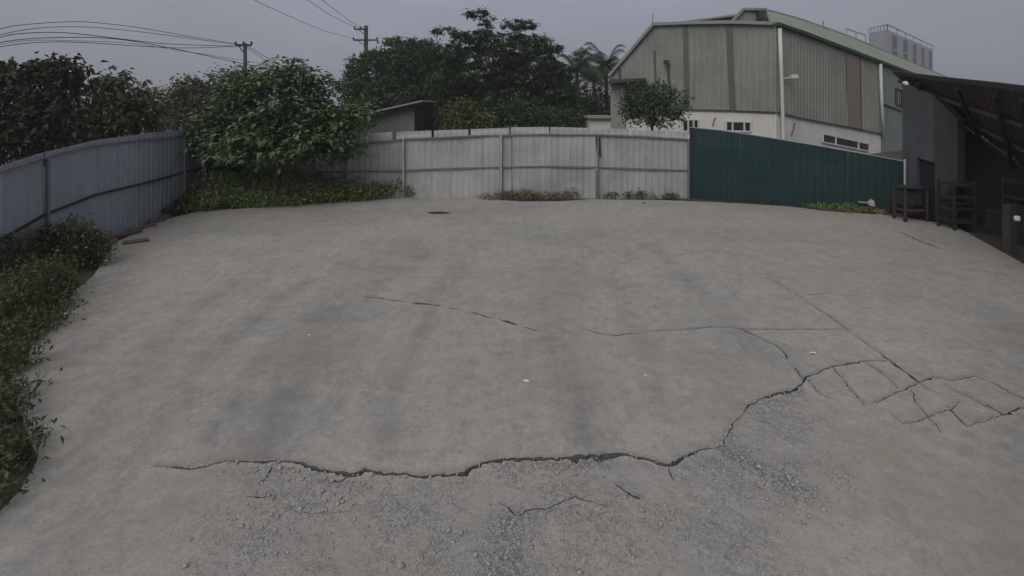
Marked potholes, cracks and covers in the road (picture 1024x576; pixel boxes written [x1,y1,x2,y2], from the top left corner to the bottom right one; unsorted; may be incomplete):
crack [156,327,1024,516]
crack [364,296,536,331]
crack [883,227,1024,275]
